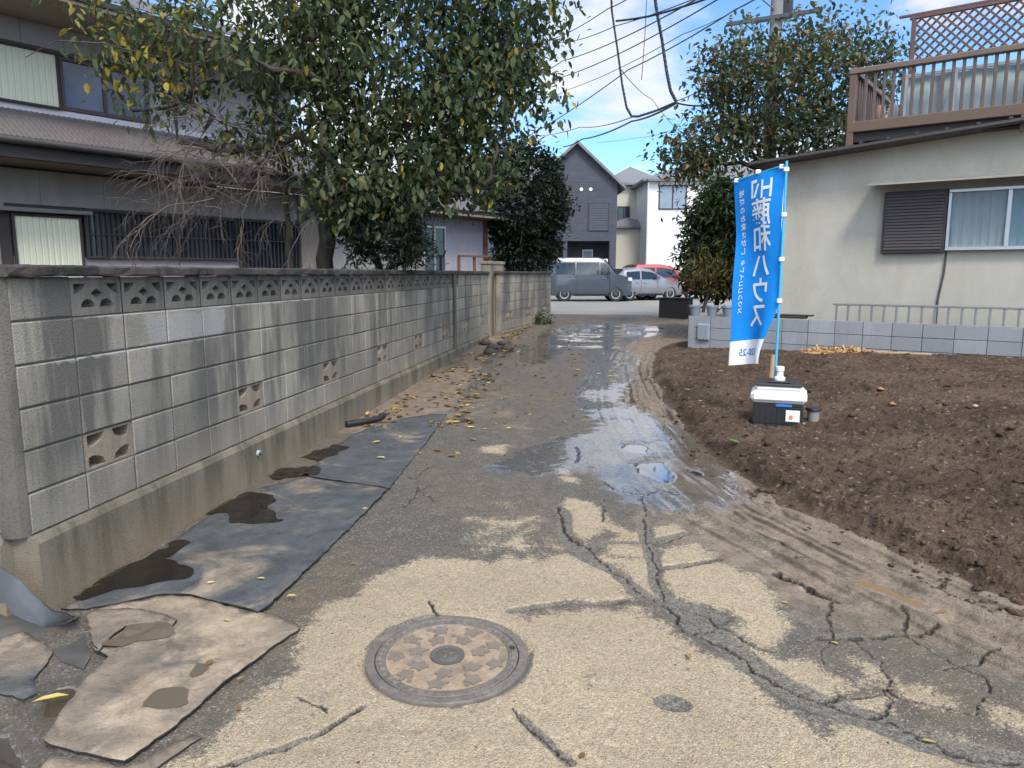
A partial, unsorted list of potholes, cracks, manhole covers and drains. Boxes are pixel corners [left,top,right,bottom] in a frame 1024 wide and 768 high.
crack [217,697,362,768]
crack [512,707,571,767]
crack [402,466,435,508]
crack [529,481,1021,767]
manhole cover [365,616,528,708]
